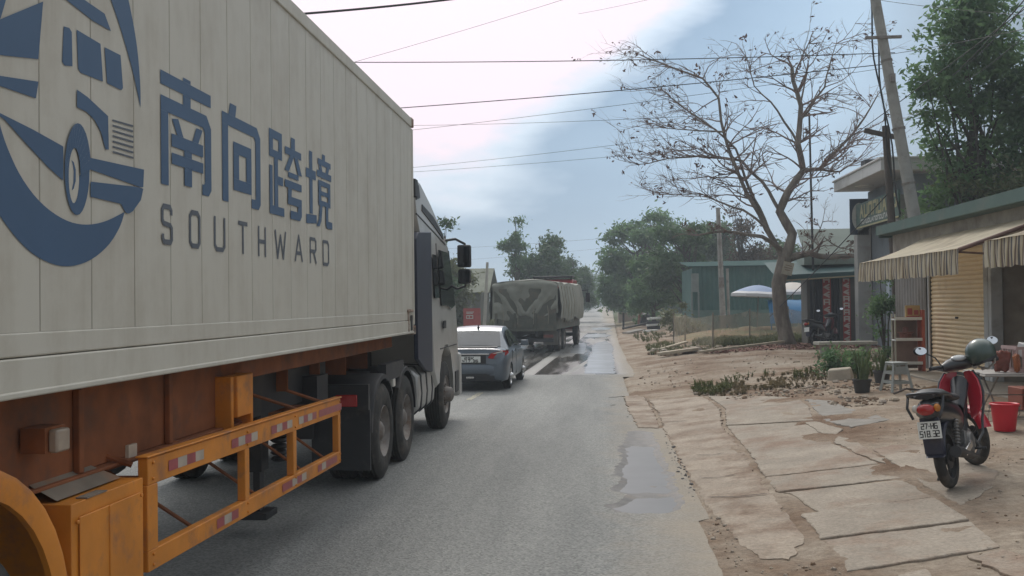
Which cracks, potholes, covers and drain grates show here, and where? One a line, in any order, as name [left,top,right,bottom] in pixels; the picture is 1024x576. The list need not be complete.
pothole [604,430,685,514]
